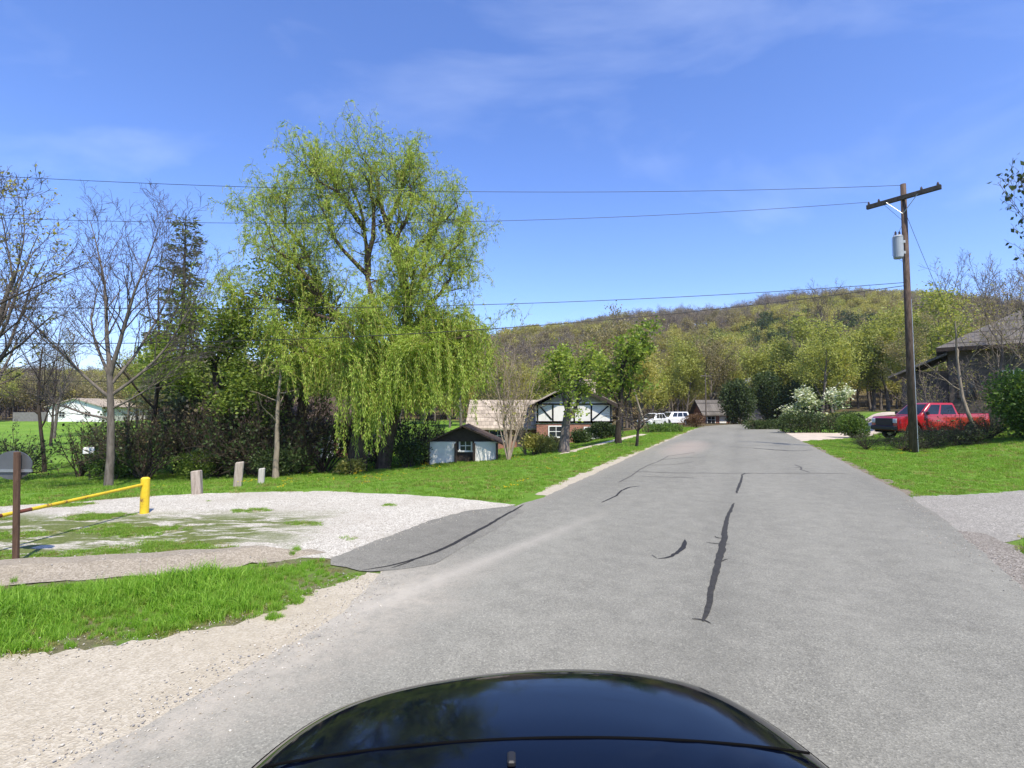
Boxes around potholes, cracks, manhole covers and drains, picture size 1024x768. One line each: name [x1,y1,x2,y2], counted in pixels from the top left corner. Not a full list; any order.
crack [602,452,848,502]
crack [654,540,687,559]
